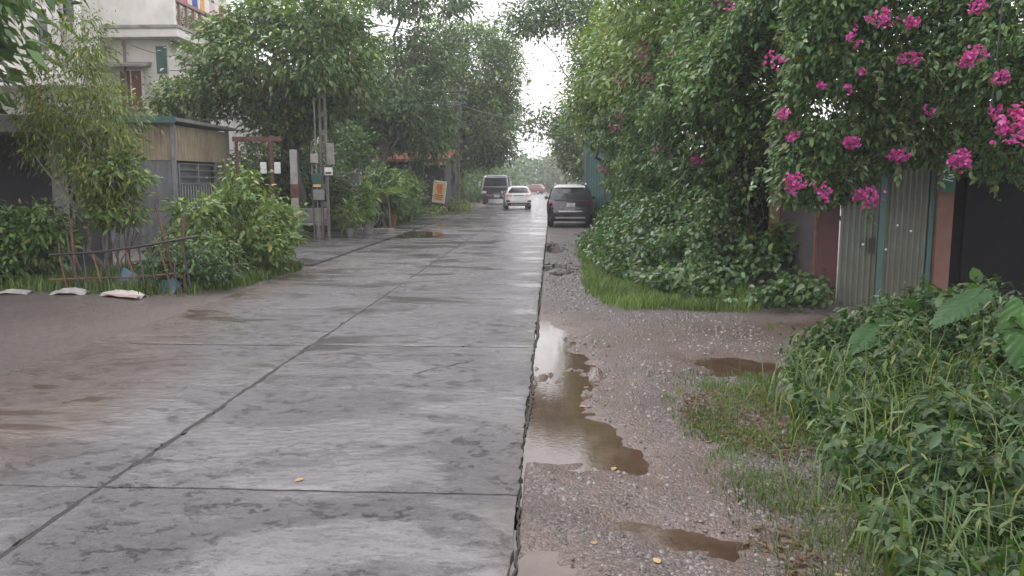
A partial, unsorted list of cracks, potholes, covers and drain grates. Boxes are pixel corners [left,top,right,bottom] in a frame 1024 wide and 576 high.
pothole [543,262,580,276]
pothole [545,242,569,256]
